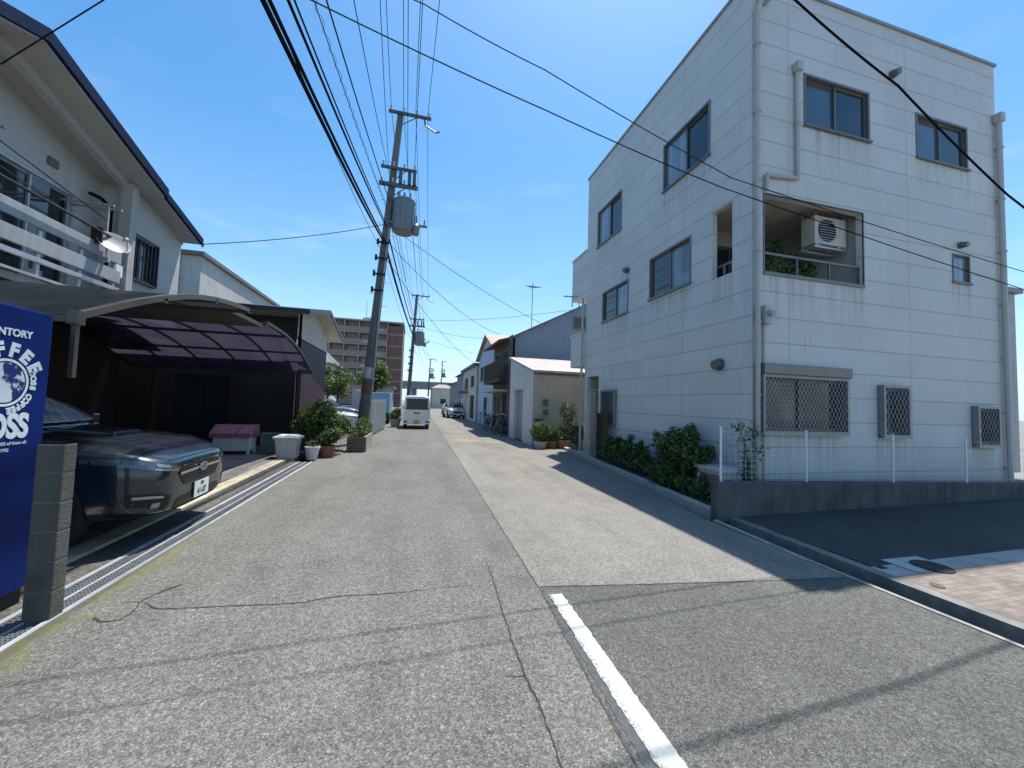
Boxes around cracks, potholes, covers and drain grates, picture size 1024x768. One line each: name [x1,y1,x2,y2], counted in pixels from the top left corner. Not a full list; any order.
crack [488,566,563,768]
crack [93,584,456,622]
manhole cover [881,556,956,574]
